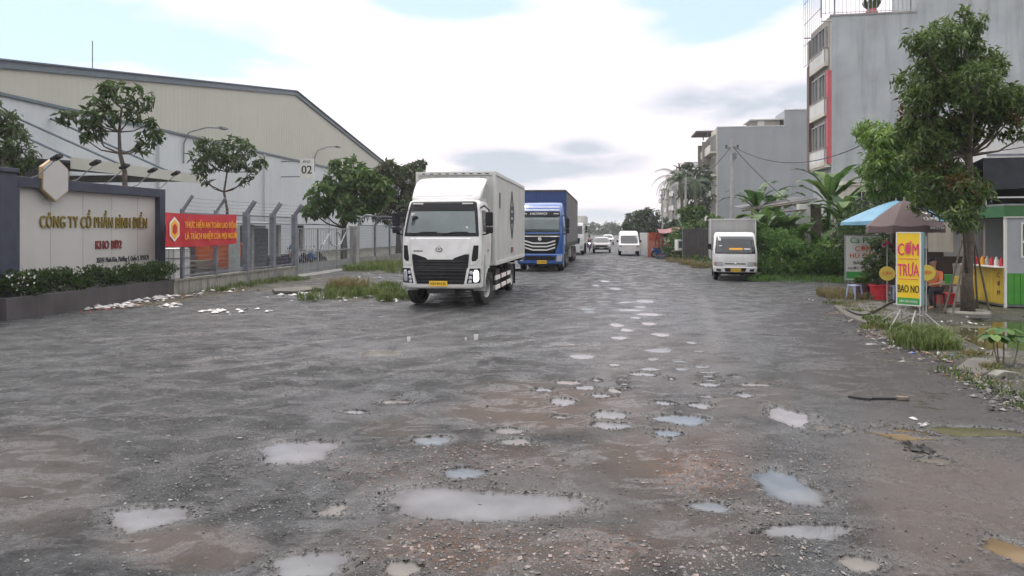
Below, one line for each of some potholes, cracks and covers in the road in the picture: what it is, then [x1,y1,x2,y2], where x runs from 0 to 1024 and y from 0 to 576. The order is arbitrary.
pothole [853,422,955,445]
pothole [757,402,845,435]
pothole [434,464,499,482]
pothole [251,544,371,576]
pothole [679,498,741,515]
pothole [865,423,1024,439]
pothole [637,411,718,428]
pothole [242,436,358,471]
pothole [88,501,214,538]
pothole [737,461,853,515]
pothole [404,433,460,446]
pothole [339,479,642,530]
